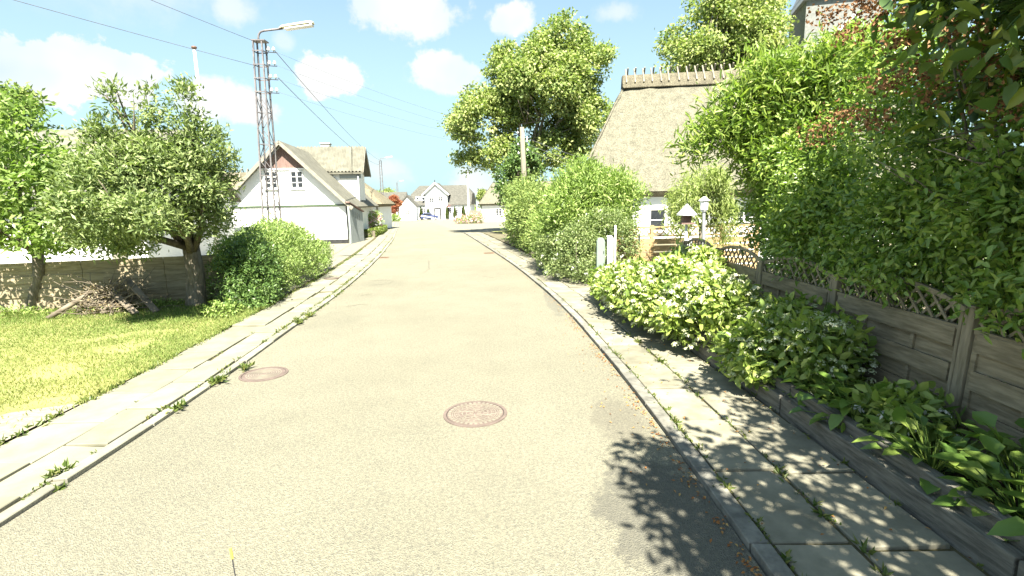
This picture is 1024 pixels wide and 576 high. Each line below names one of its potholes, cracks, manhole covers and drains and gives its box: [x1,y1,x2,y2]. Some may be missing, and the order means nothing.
manhole cover [238,367,289,382]
manhole cover [443,401,507,428]
